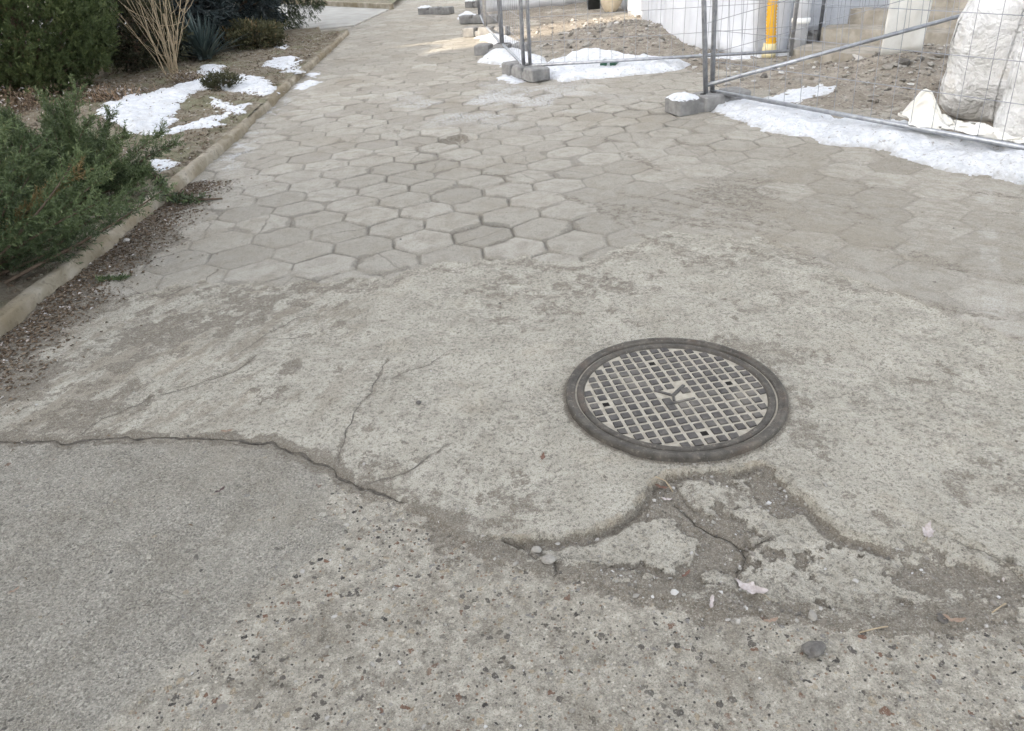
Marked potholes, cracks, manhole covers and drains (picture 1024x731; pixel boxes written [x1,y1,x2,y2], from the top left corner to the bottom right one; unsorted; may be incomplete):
manhole cover [566,337,789,463]
crack [0,316,453,502]
crack [674,506,770,587]
pothole [478,461,1024,631]
